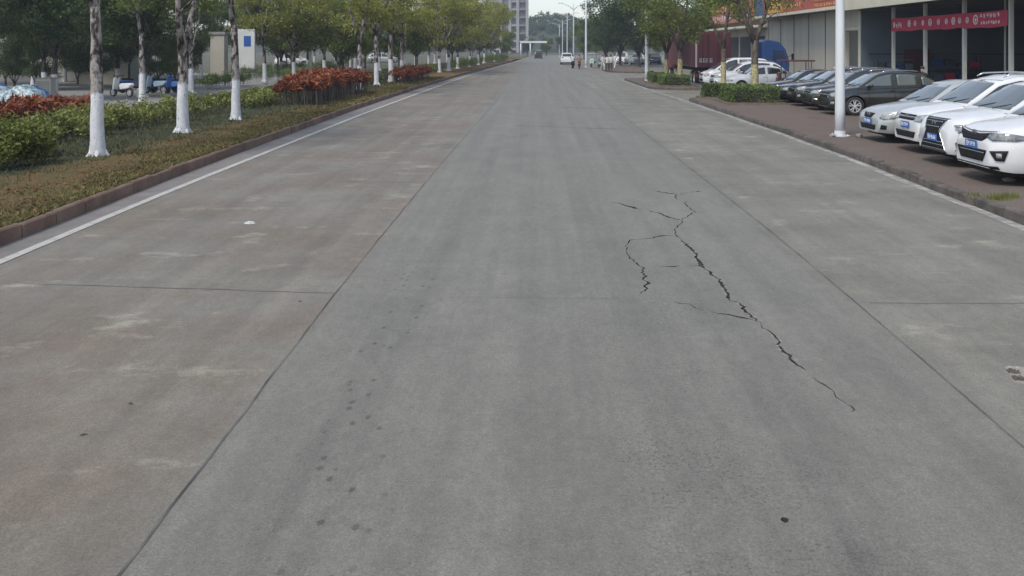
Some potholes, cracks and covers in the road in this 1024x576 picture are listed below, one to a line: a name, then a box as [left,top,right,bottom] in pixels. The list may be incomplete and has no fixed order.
crack [612,191,855,411]
